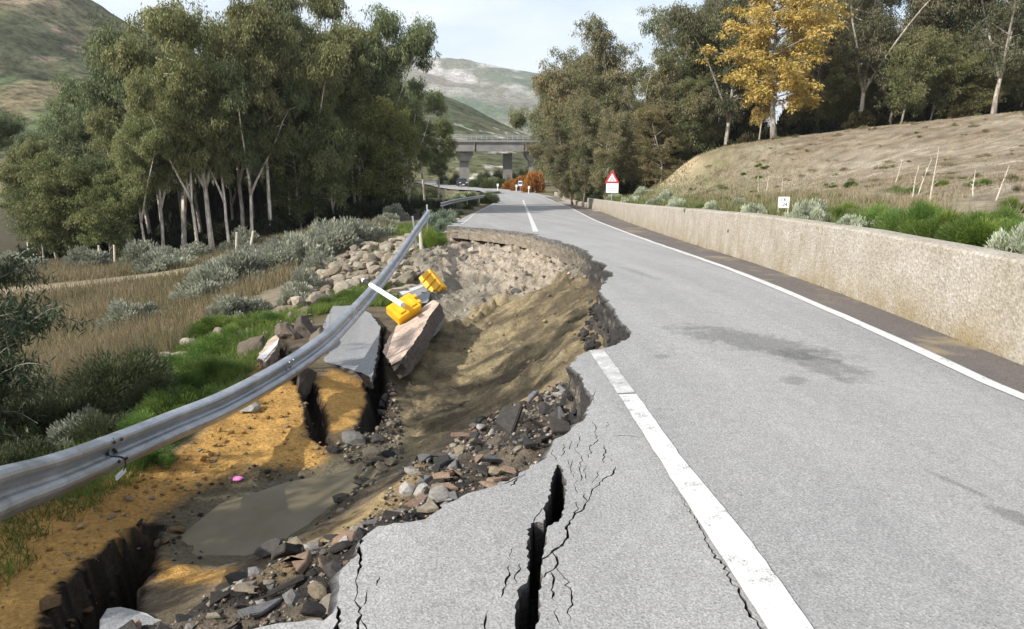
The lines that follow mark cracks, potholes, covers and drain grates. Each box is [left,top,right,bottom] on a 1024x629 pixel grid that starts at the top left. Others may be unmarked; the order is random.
crack [333,539,380,629]
crack [681,497,763,629]
crack [484,391,639,629]
